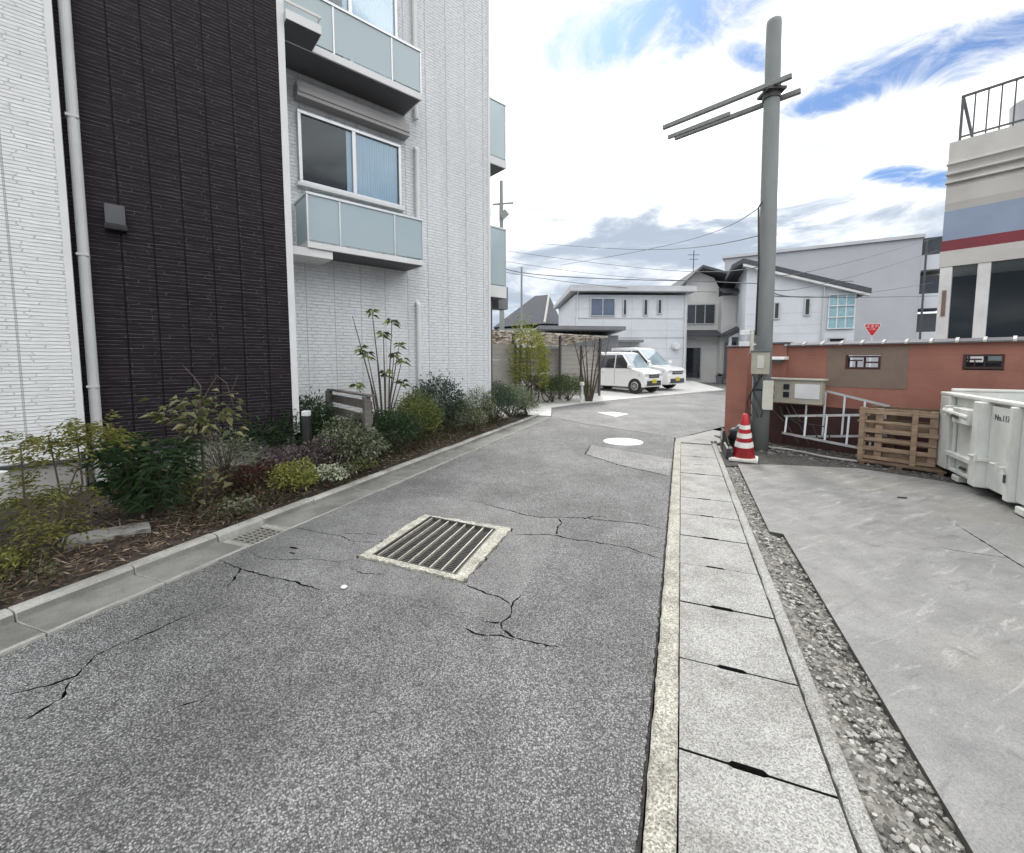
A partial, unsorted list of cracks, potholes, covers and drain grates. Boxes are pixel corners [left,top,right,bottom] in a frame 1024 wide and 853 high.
crack [221,553,373,590]
crack [490,505,663,557]
crack [464,584,560,648]
drain grate [358,514,511,584]
drain grate [229,527,282,545]
crack [7,605,209,720]
